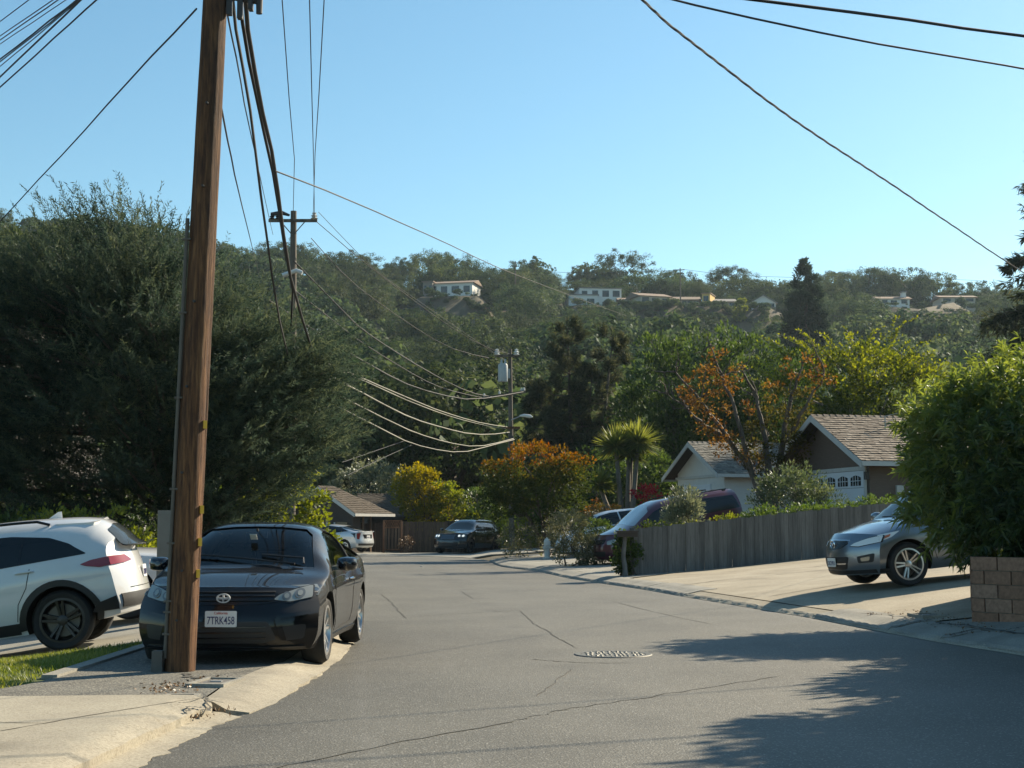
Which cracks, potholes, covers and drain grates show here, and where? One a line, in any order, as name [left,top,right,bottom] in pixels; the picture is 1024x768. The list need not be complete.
manhole cover [574,650,652,658]
crack [426,591,576,648]
crack [936,622,1024,634]
crack [181,673,223,712]
